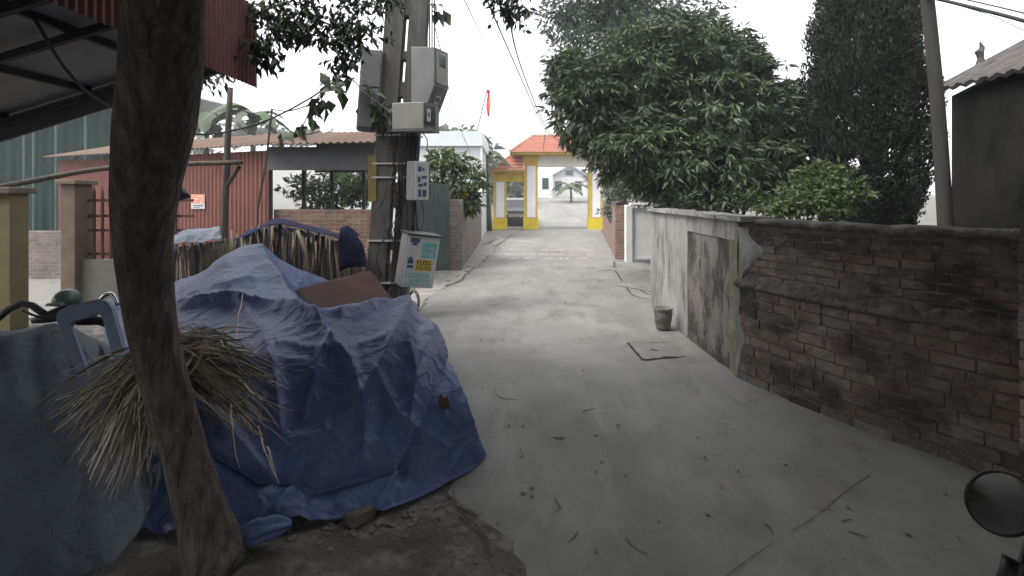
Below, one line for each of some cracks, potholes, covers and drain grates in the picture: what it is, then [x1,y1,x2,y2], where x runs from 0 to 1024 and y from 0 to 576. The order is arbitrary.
crack [444,267,475,286]
crack [790,475,869,532]
manhole cover [627,342,686,360]
crack [601,261,651,300]
